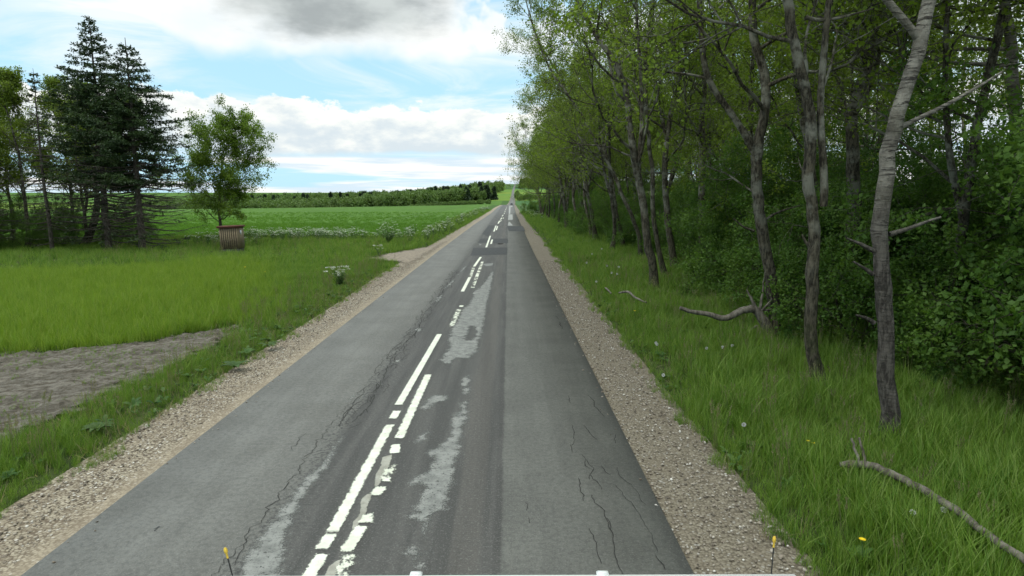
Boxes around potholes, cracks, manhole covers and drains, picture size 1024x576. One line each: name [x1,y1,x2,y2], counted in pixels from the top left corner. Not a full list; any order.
crack [571,395,665,575]
crack [211,269,458,576]
